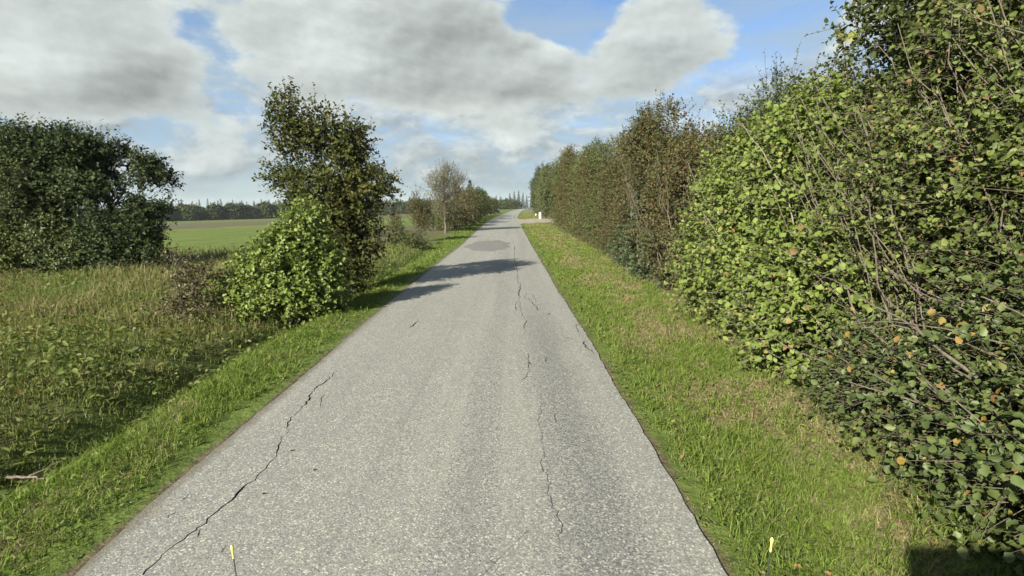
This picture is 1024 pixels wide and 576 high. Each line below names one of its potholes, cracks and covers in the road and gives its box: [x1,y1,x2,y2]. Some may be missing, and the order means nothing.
crack [142,372,335,575]
crack [537,401,563,549]
crack [513,242,538,332]
